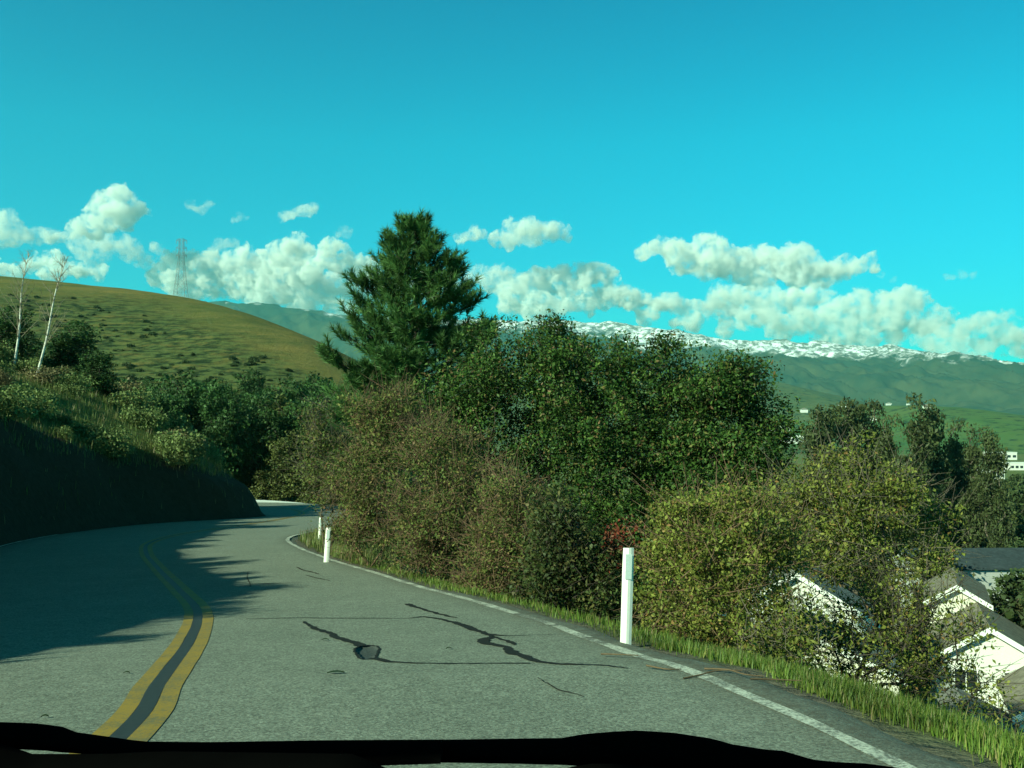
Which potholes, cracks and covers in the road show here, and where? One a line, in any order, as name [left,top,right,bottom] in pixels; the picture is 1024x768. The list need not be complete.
pothole [353,645,381,660]
